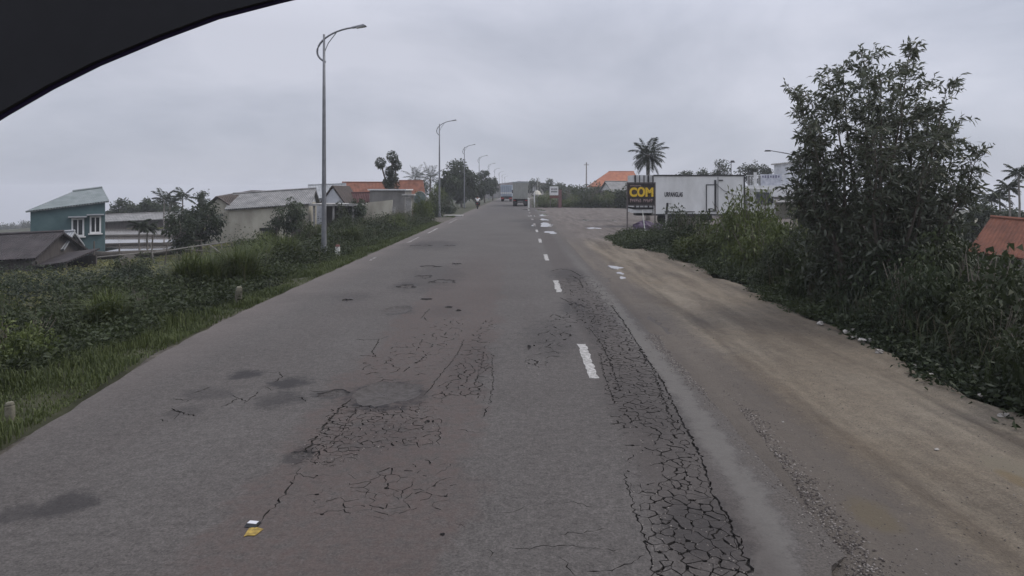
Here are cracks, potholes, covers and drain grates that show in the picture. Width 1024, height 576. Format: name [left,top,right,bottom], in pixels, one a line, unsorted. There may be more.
crack [161,372,457,521]
pothole [382,306,412,314]
crack [515,269,754,576]
crack [359,311,495,433]
